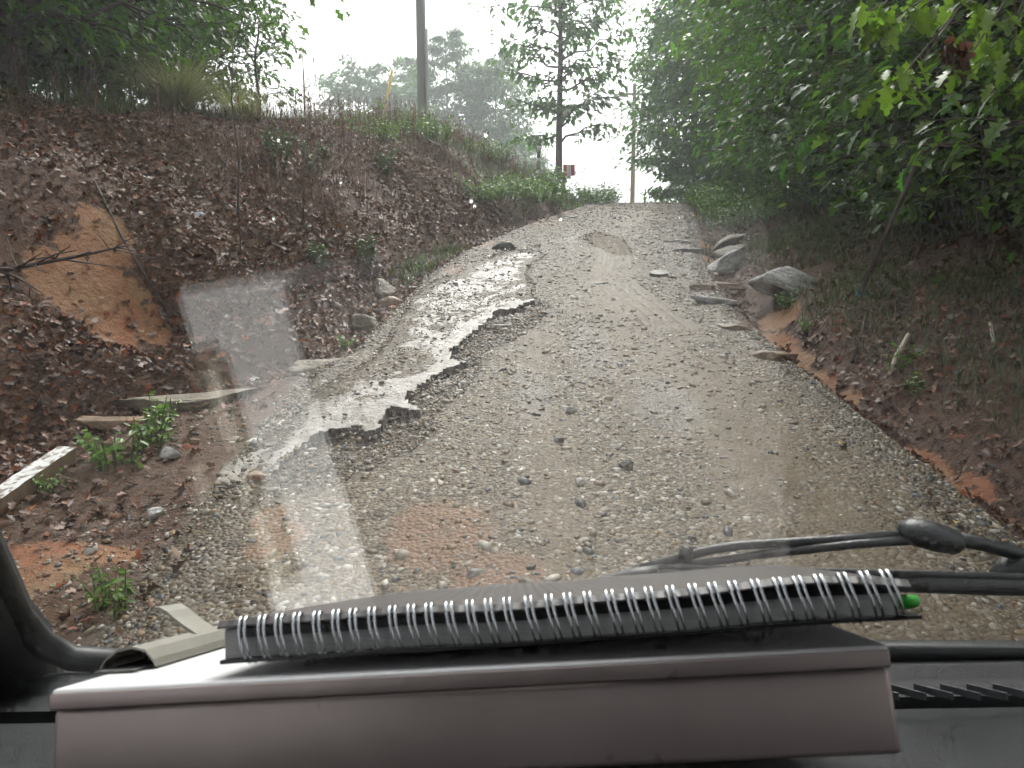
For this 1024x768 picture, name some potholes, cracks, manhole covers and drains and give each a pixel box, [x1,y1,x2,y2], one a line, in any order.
pothole [582,231,637,256]
